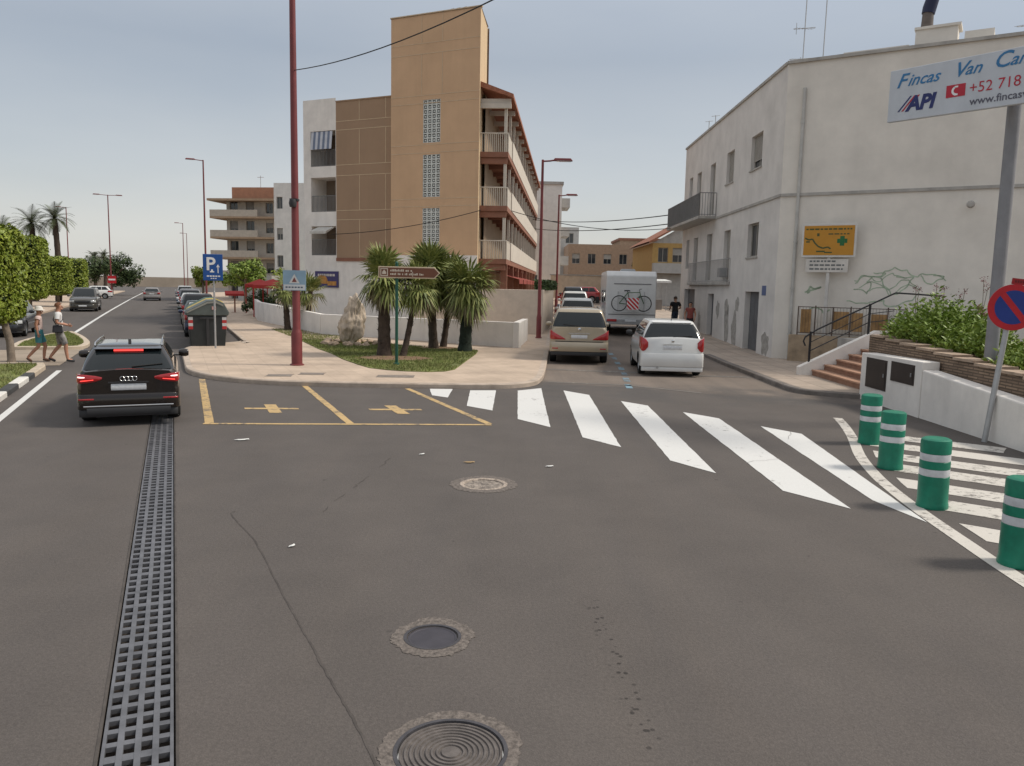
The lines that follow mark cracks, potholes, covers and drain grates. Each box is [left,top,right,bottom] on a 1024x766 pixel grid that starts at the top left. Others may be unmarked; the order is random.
crack [231,458,390,766]
manhole cover [390,617,476,657]
manhole cover [376,710,524,766]
manhole cover [449,476,517,493]
